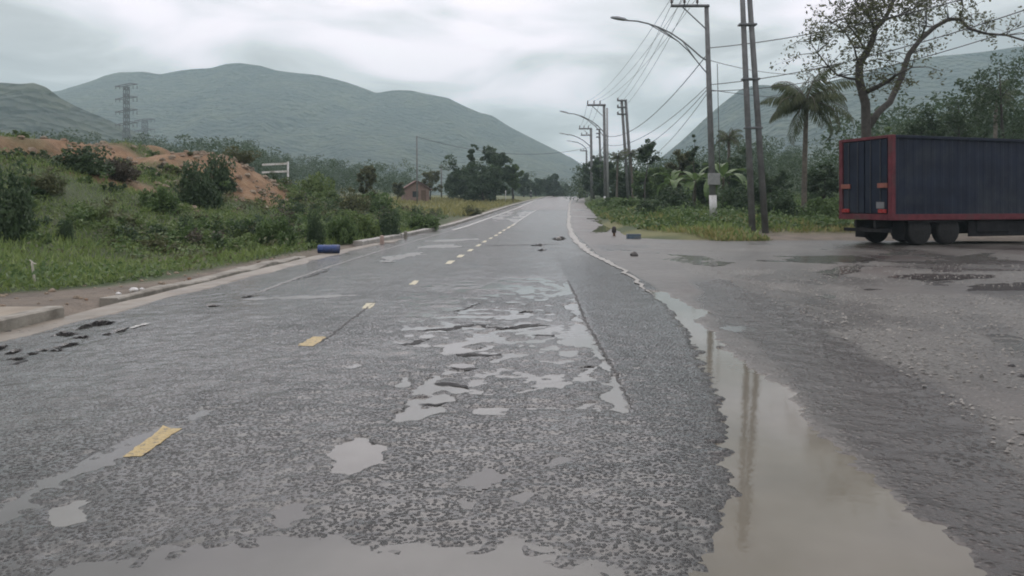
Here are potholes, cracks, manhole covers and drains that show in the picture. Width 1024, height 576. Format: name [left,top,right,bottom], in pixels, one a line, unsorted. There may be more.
crack [400,303,555,345]
pothole [395,370,414,388]
pothole [326,437,387,478]
pothole [438,333,508,355]
pothole [76,320,115,330]
pothole [598,379,631,414]
pothole [392,394,456,422]
pothole [573,402,599,410]
pothole [561,304,583,322]
pothole [48,500,100,527]
